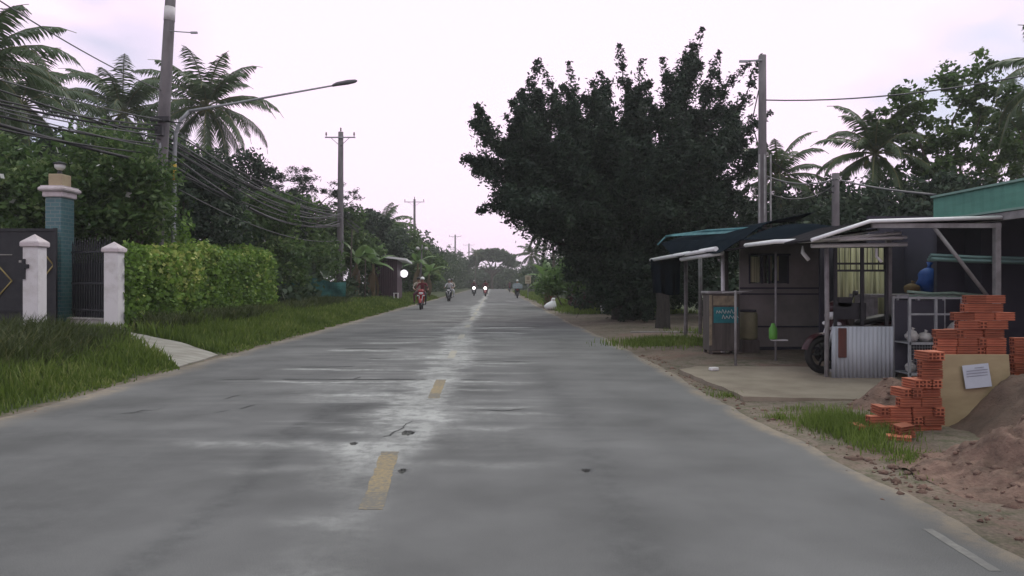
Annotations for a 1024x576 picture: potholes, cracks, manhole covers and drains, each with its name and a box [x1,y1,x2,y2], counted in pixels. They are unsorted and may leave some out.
pothole [392,466,415,477]
pothole [394,429,422,438]
